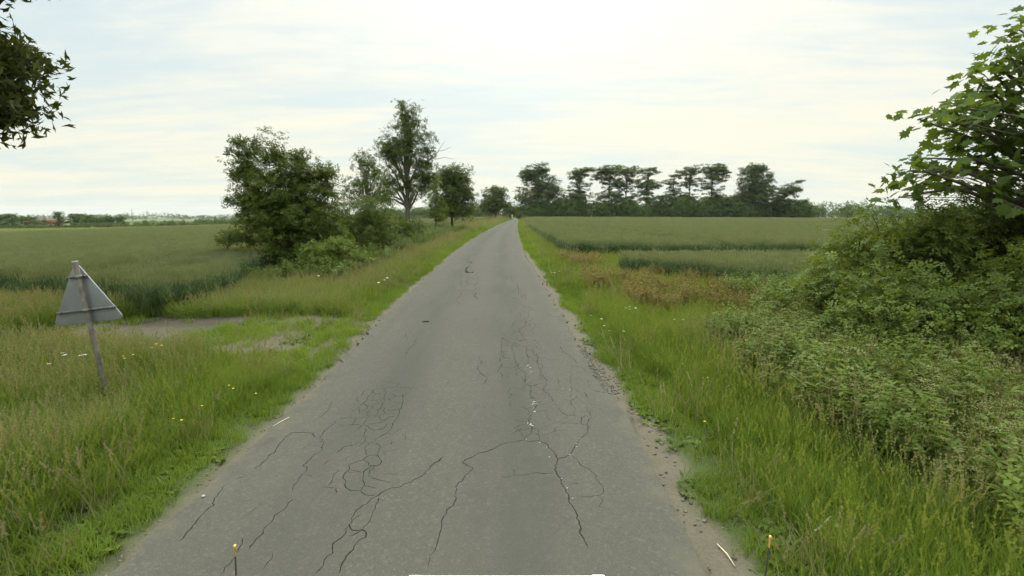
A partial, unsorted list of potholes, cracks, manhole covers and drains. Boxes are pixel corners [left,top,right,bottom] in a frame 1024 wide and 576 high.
crack [428,277,604,565]
crack [309,380,441,573]
crack [181,402,336,574]
